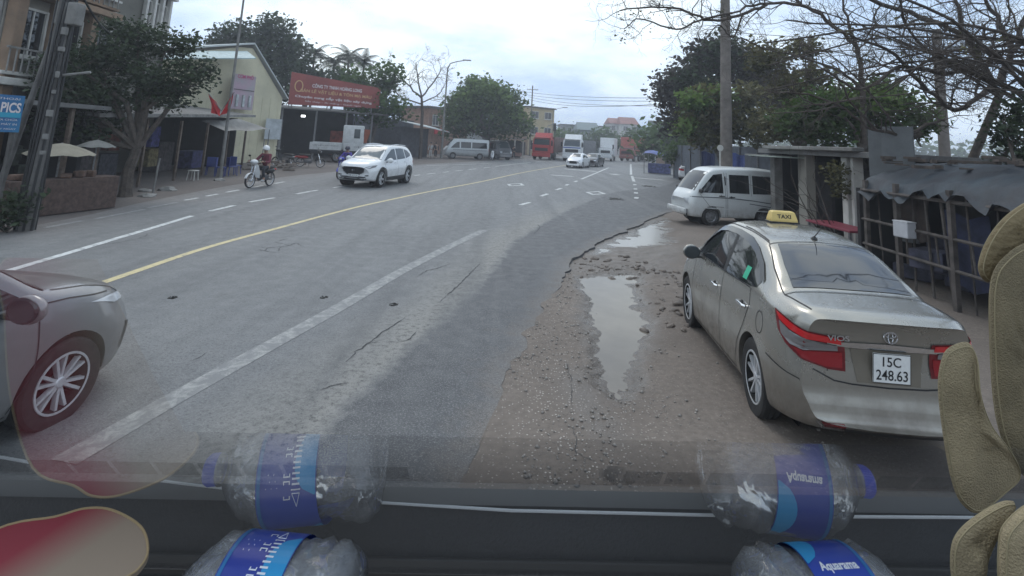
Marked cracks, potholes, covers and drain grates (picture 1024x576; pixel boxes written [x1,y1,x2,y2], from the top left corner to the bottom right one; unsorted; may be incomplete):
crack [348,319,416,360]
pothole [572,272,657,401]
